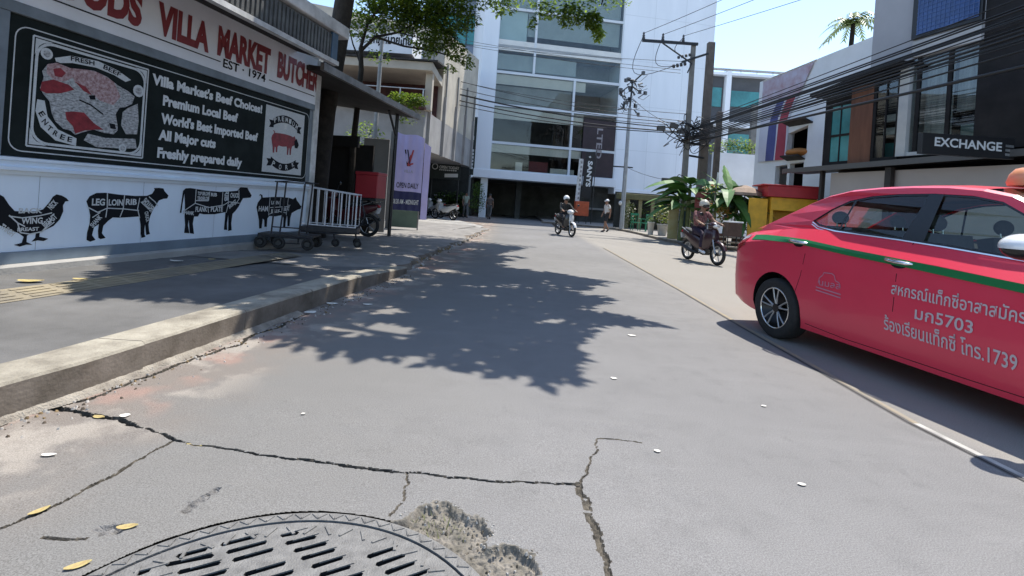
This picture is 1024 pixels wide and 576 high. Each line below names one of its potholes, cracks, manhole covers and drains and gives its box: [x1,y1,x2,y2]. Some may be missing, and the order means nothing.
pothole [390,500,542,576]
crack [0,314,642,576]
manhole cover [87,513,480,576]
